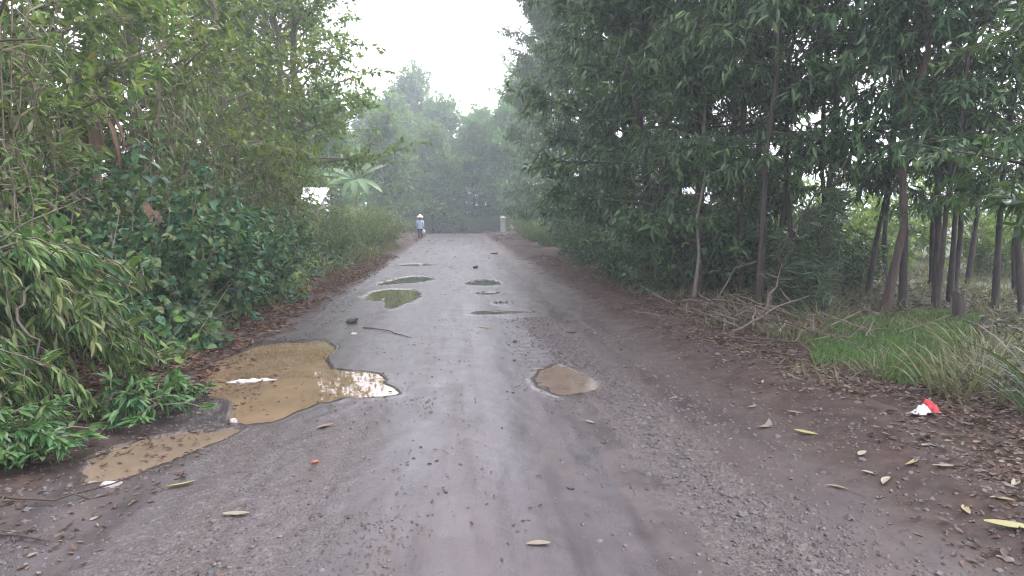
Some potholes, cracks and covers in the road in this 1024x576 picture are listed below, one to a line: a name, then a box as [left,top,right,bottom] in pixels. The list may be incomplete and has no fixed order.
pothole [525,362,609,399]
pothole [351,287,426,310]
pothole [192,339,407,430]
pothole [65,425,251,488]
pothole [371,275,440,286]
